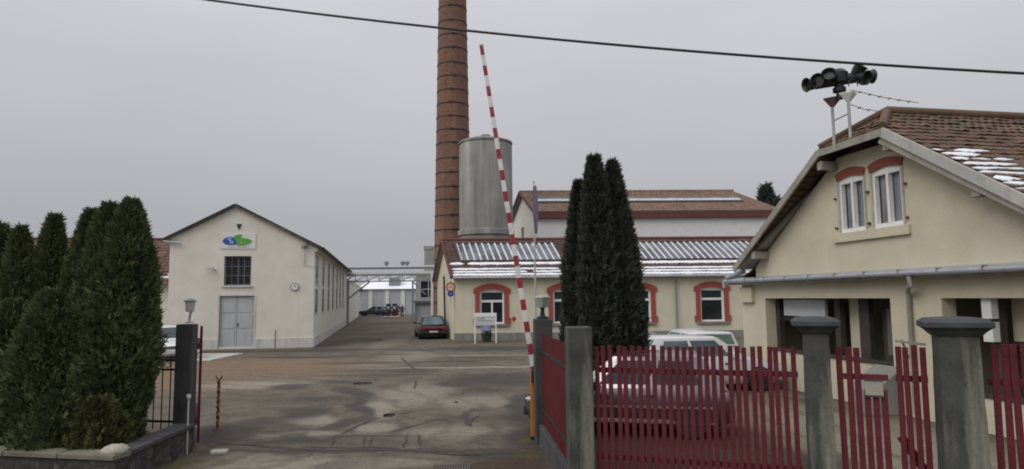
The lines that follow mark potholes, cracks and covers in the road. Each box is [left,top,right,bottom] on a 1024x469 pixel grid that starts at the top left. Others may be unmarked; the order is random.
crack [322,411,479,447]
crack [401,350,435,389]
